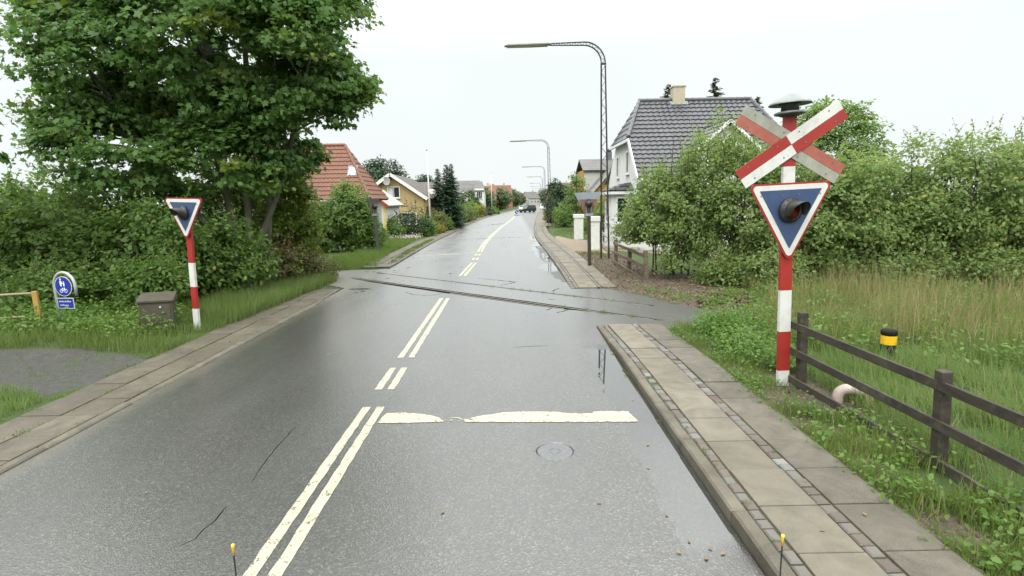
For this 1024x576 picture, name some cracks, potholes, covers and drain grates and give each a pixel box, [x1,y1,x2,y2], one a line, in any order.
manhole cover [535,442,574,460]
crack [181,506,227,546]
